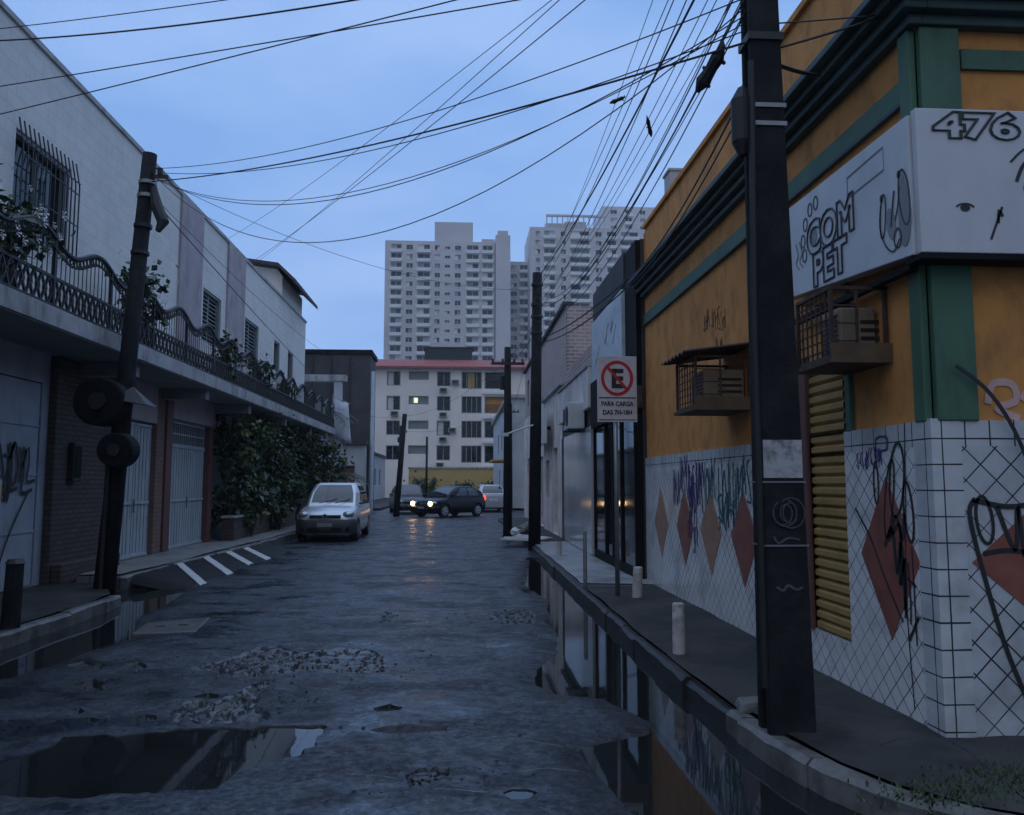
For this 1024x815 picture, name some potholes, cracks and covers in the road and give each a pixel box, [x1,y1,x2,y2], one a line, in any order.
pothole [405,766,454,788]
pothole [371,724,448,734]
pothole [172,680,276,724]
pothole [374,704,403,712]
pothole [191,646,390,679]
manhole cover [132,617,210,638]
pothole [504,789,537,799]
pothole [377,611,399,623]
pothole [0,725,327,799]
pothole [486,608,537,624]
